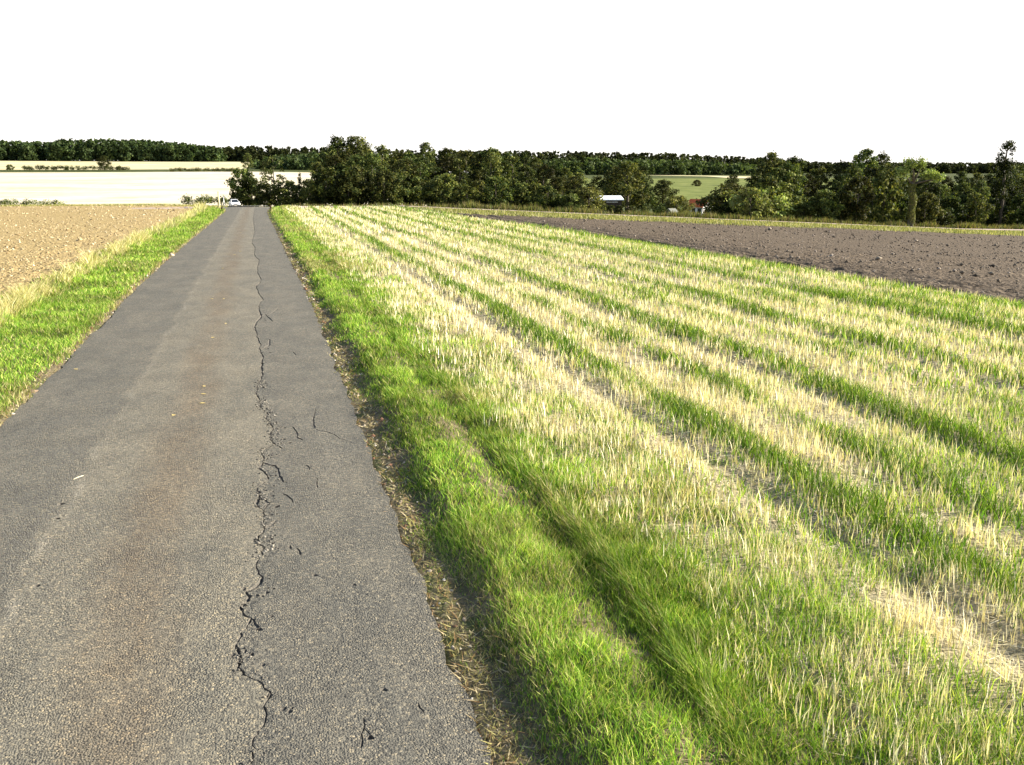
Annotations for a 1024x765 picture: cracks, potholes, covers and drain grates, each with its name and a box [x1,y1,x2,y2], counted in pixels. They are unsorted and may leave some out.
crack [229,214,302,765]
crack [293,409,344,440]
crack [360,718,372,749]
